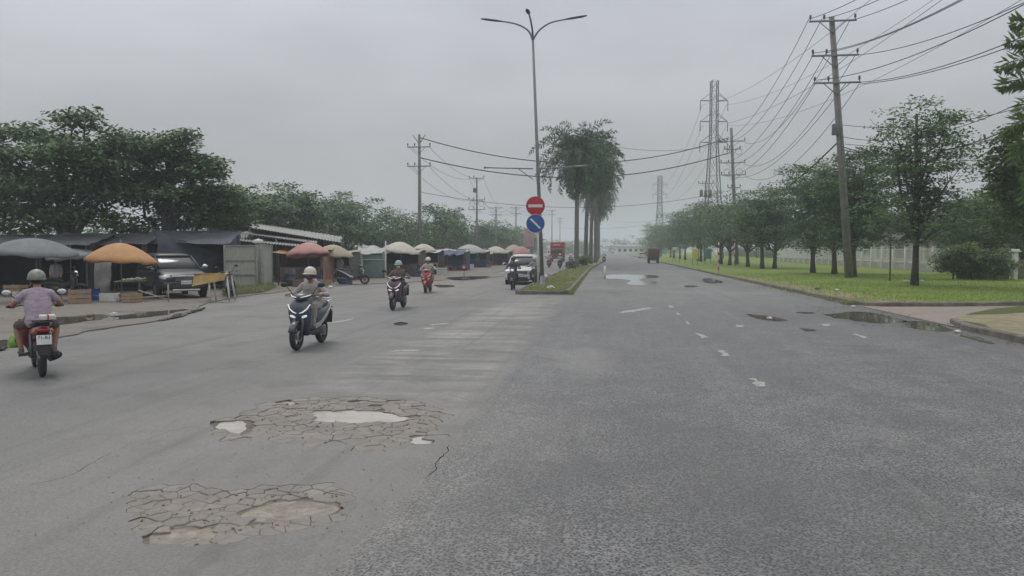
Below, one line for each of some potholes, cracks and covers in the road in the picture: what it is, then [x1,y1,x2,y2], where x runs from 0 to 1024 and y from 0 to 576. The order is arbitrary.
pothole [215,421,247,434]
pothole [311,410,409,424]
crack [126,482,378,574]
crack [124,396,497,475]
pothole [241,501,339,522]
pothole [745,314,788,322]
pothole [149,526,217,544]
